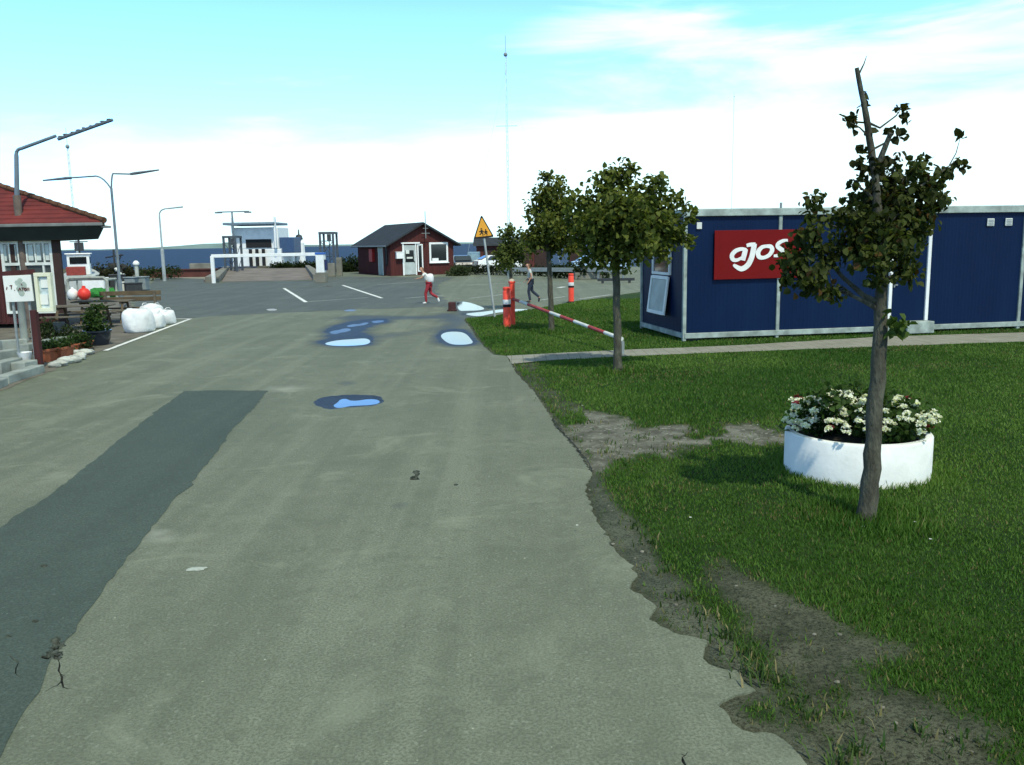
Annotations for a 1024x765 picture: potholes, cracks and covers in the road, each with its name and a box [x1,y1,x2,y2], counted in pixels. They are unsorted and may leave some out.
pothole [313,395,384,409]
crack [45,660,68,692]
pothole [317,318,388,347]
pothole [435,329,479,346]
